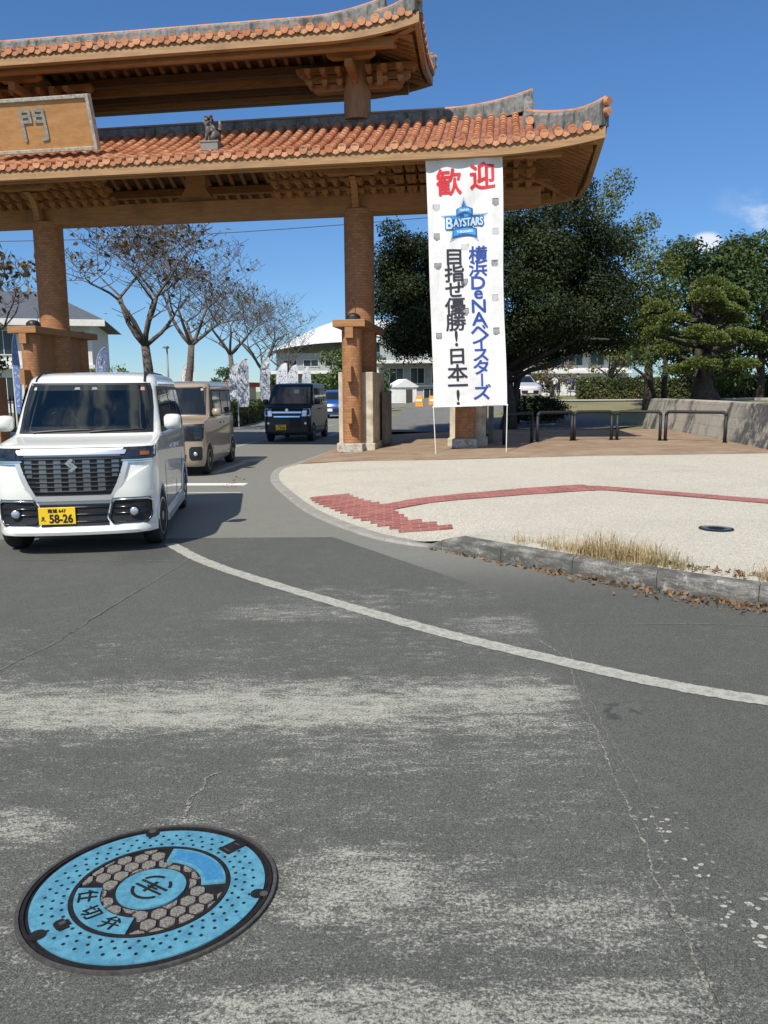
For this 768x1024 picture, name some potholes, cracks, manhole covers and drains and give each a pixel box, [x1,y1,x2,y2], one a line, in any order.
crack [539,623,764,1024]
manhole cover [14,825,277,976]
crack [181,771,221,818]
